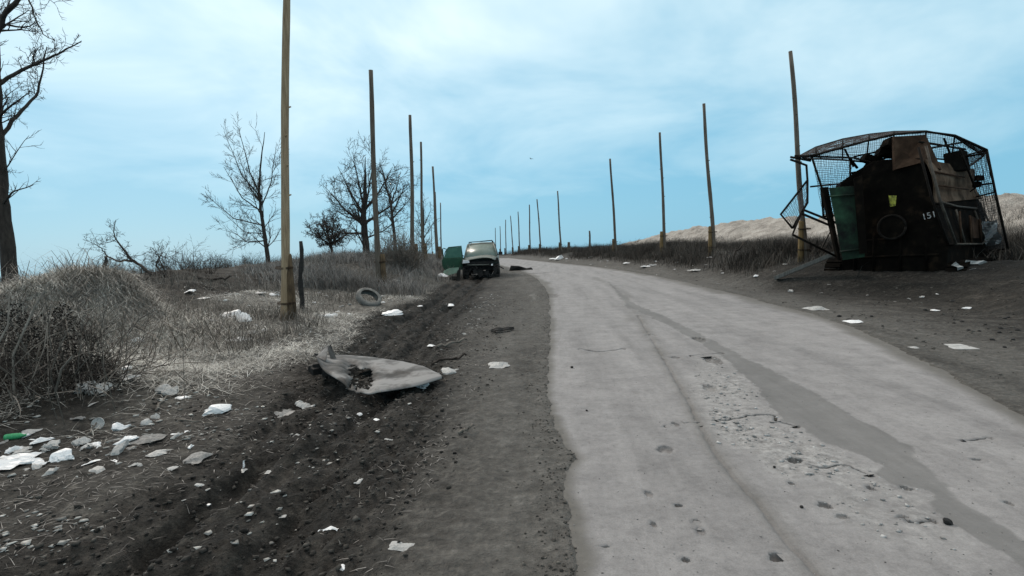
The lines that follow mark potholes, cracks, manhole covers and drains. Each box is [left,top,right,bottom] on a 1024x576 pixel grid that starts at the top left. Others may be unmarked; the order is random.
crack [579,316,873,576]
pothole [760,548,800,567]
pothole [651,443,679,456]
